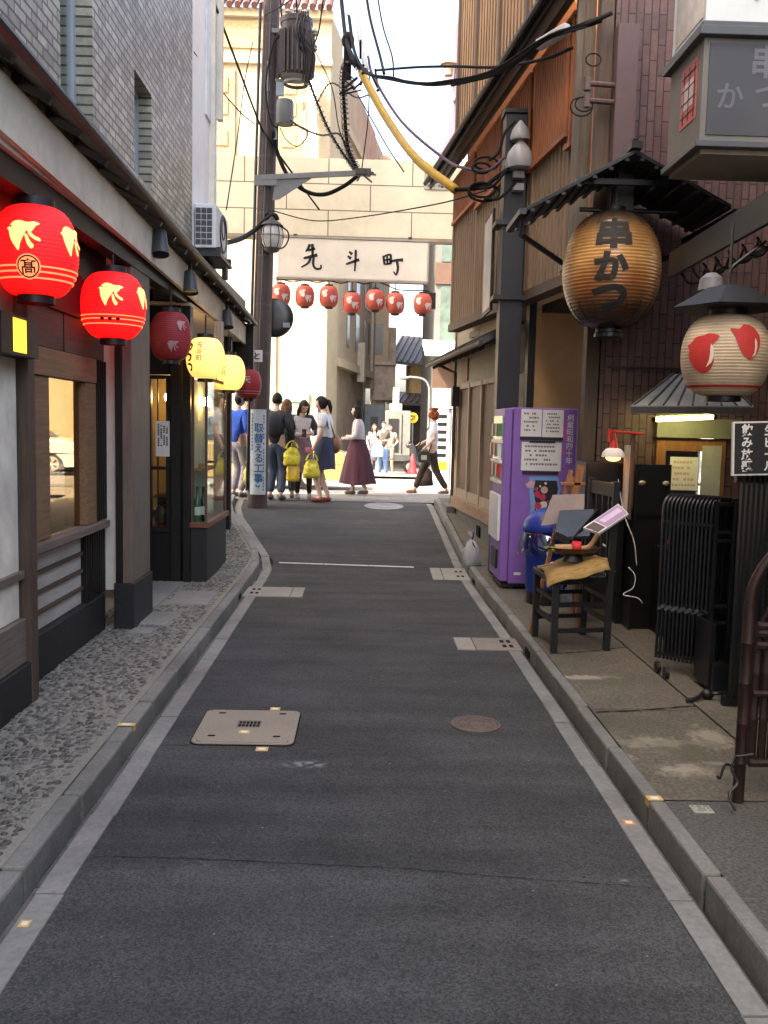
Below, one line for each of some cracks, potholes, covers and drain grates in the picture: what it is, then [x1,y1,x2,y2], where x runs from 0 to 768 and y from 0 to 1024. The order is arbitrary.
manhole cover [451,715,501,733]
manhole cover [190,710,301,747]
